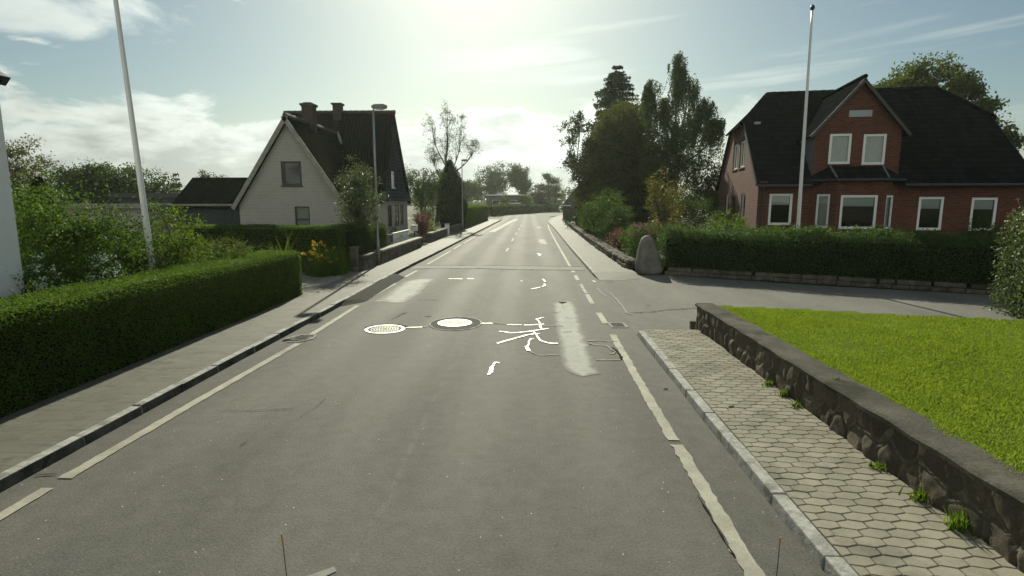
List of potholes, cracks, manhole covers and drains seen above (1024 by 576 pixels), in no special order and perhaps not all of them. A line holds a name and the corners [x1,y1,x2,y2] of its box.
manhole cover [437,319,472,327]
manhole cover [364,325,405,334]
crack [483,279,623,360]
